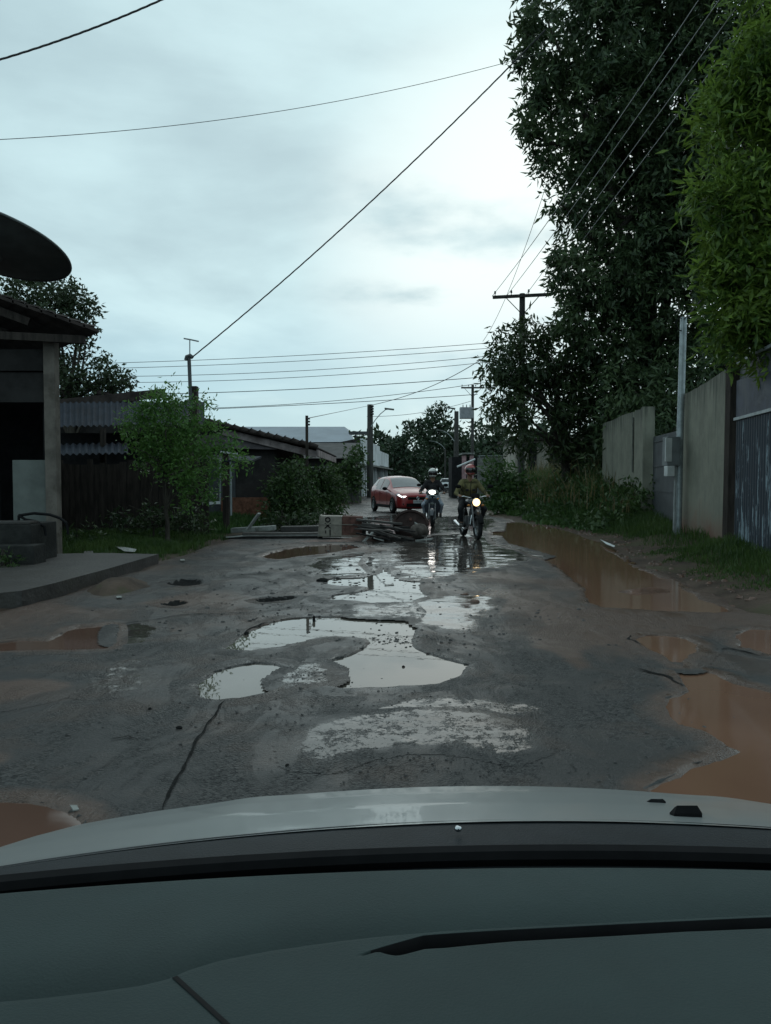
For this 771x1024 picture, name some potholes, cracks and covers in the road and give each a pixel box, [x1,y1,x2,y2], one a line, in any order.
pothole [167,657,304,708]
pothole [243,543,374,561]
pothole [149,599,200,609]
pothole [0,620,129,656]
pothole [155,577,213,587]
pothole [482,522,771,620]
pothole [602,662,771,804]
pothole [197,613,495,696]
pothole [244,595,308,604]
crack [636,667,683,686]
